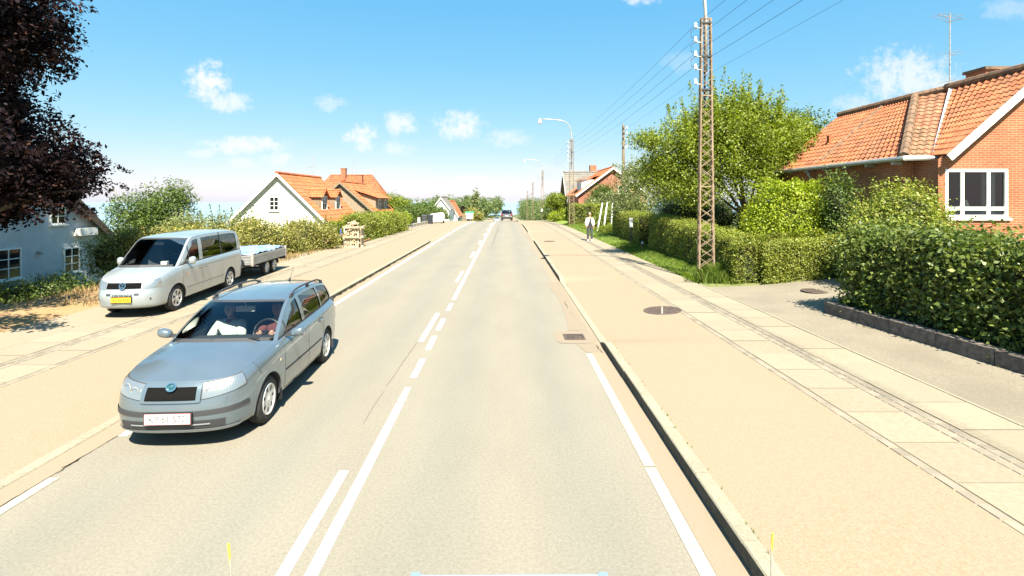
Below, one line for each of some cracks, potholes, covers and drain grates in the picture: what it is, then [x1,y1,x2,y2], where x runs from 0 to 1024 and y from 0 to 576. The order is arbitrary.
manhole cover [643,306,681,315]
